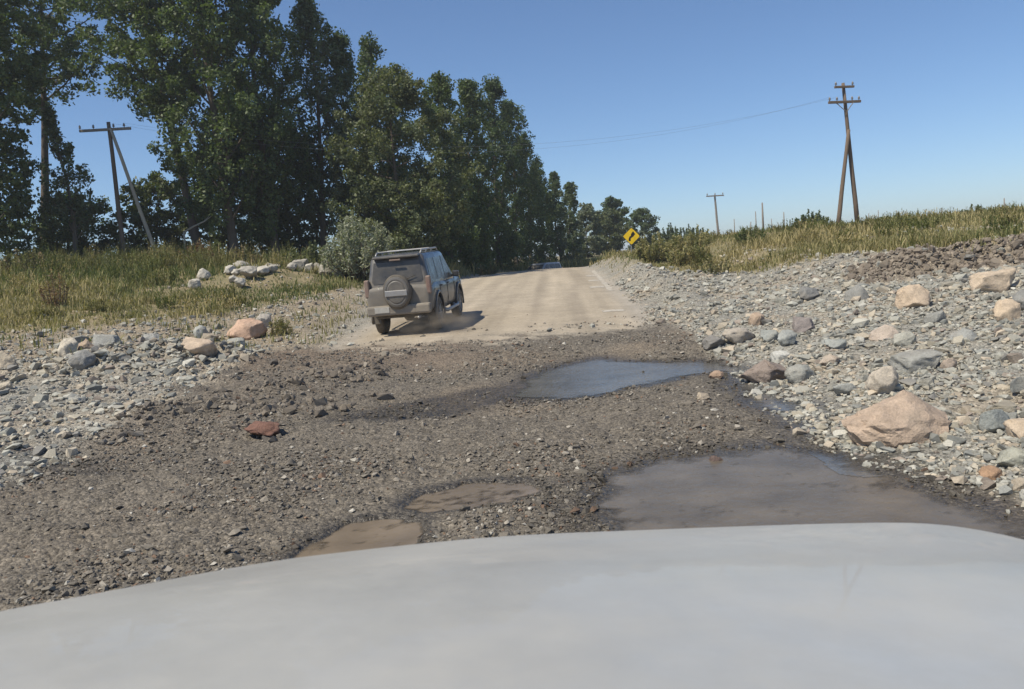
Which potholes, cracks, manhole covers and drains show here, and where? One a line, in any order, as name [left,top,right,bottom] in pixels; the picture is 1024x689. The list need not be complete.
pothole [385,476,553,515]
pothole [263,510,434,563]
